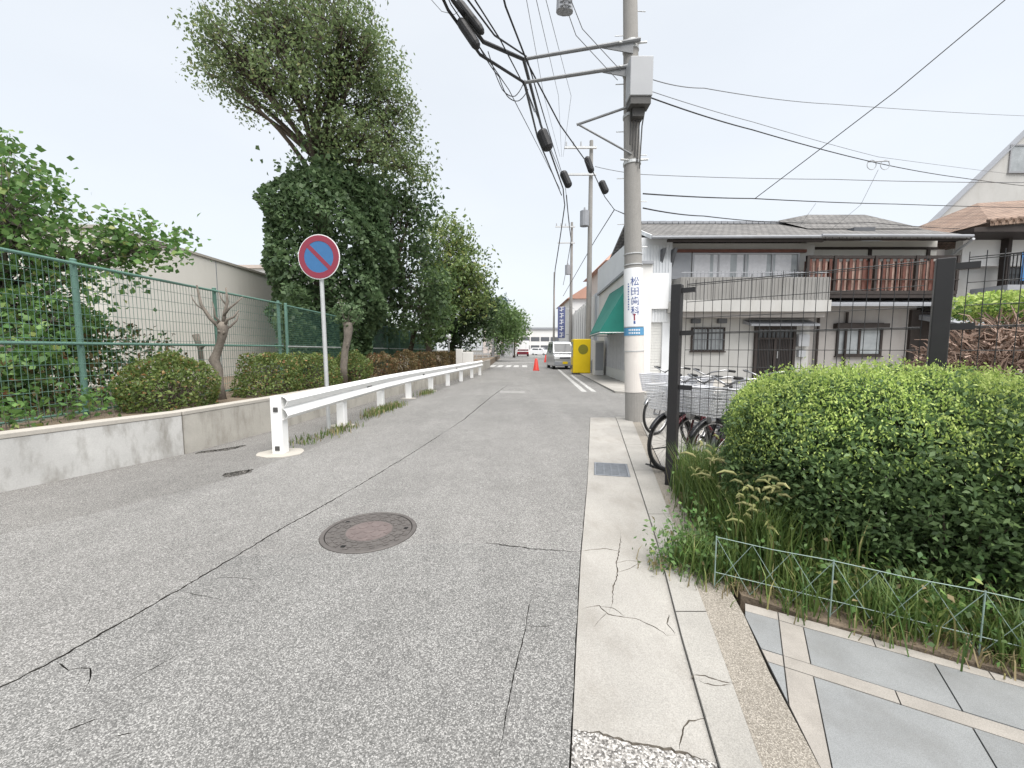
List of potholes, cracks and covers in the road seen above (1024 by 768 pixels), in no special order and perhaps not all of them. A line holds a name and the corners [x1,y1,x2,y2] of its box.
crack [497,595,554,766]
crack [489,534,677,636]
drain grate [594,462,630,477]
manhole cover [319,512,416,554]
crack [63,655,176,732]
